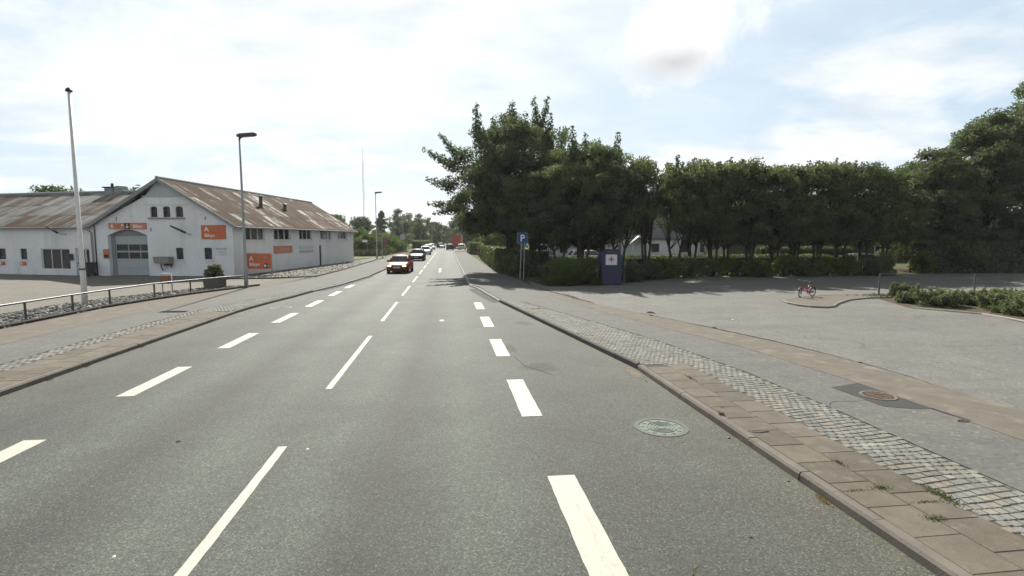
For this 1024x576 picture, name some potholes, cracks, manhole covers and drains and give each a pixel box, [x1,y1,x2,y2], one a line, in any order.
manhole cover [859,391,898,401]
manhole cover [634,418,689,437]
